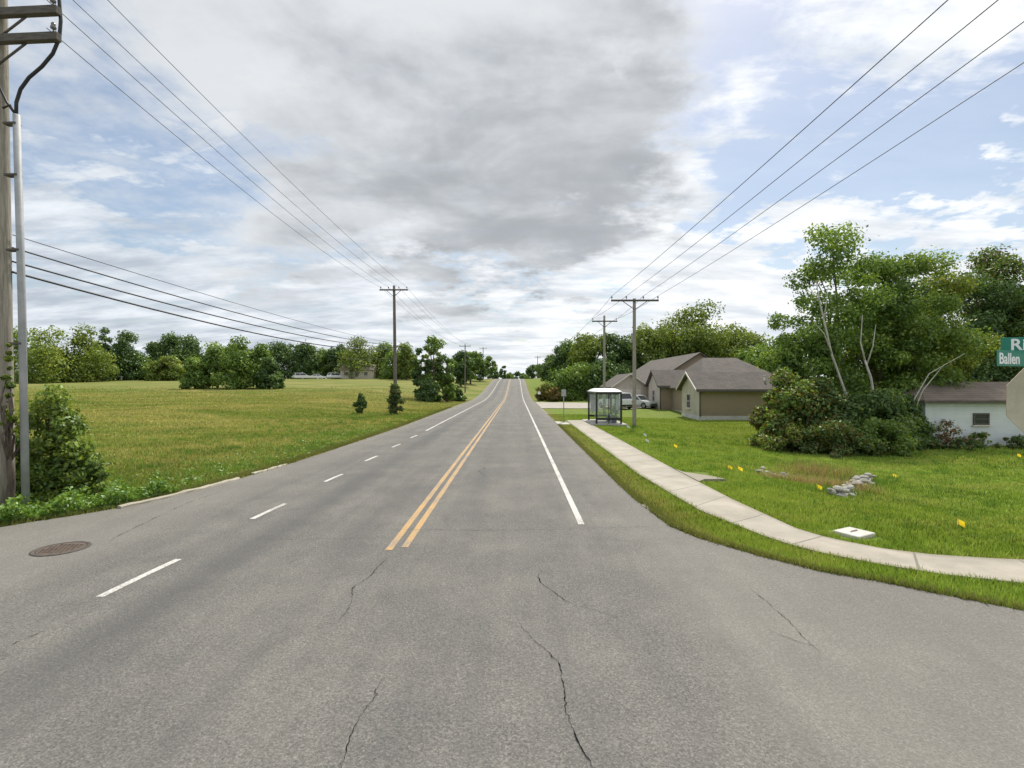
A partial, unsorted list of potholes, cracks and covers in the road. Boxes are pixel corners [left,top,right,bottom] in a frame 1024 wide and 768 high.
manhole cover [29,541,92,557]
crack [521,626,592,766]
utility cover [833,527,876,540]
